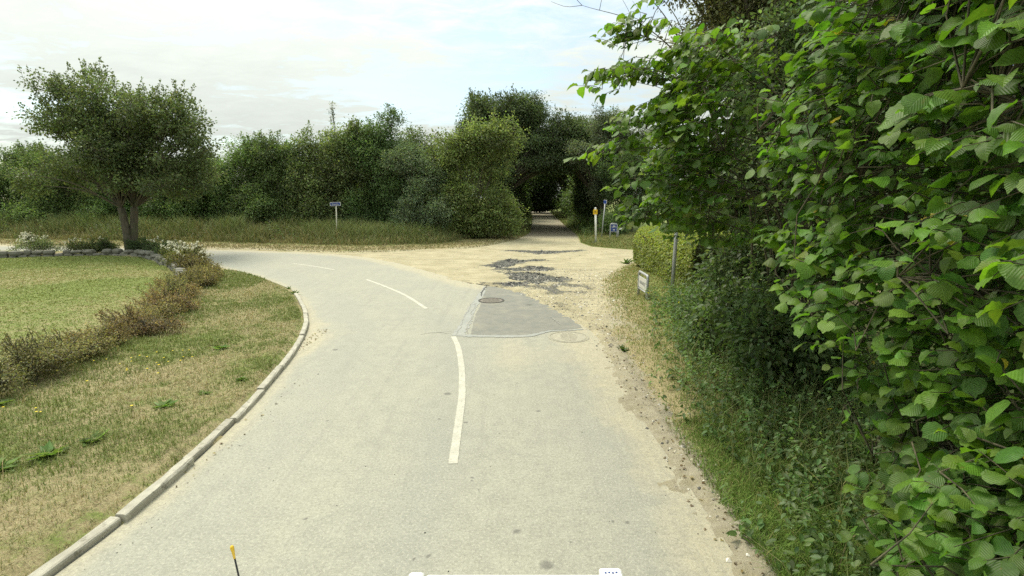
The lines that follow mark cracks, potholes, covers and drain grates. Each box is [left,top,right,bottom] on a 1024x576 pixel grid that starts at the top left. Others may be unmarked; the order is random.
manhole cover [548,331,589,343]
